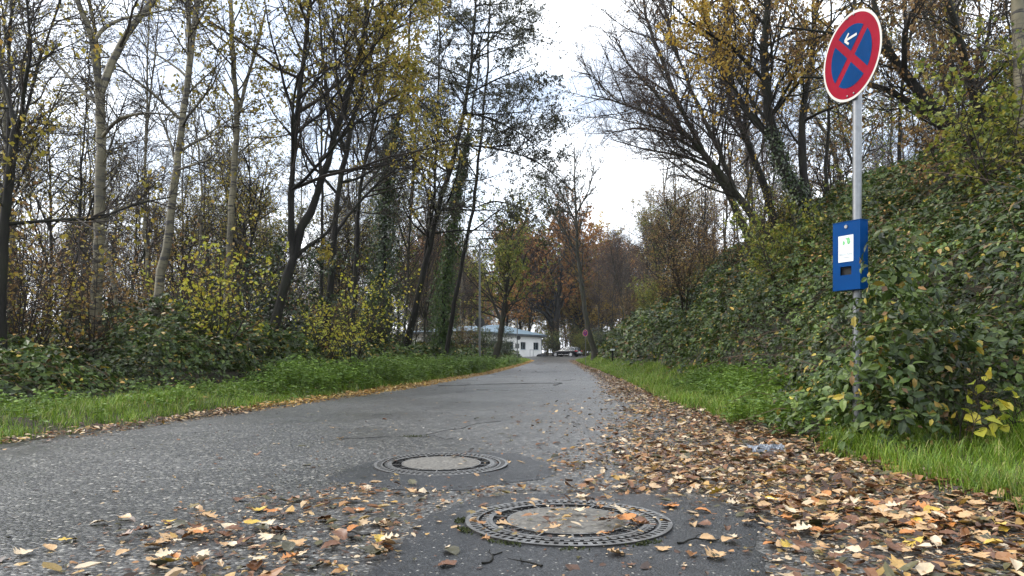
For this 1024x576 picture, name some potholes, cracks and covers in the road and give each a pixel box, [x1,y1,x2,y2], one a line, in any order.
manhole cover [465,500,673,547]
crack [352,421,498,439]
manhole cover [374,452,508,475]
